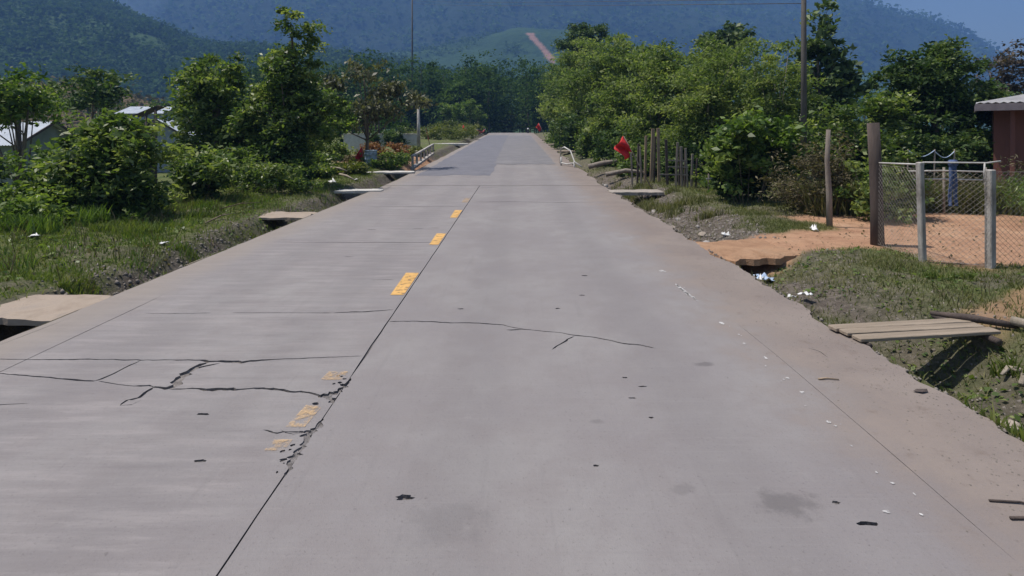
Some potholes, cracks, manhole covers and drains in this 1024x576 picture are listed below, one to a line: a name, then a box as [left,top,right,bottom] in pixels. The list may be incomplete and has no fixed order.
crack [158,310,653,349]
crack [0,356,353,406]
